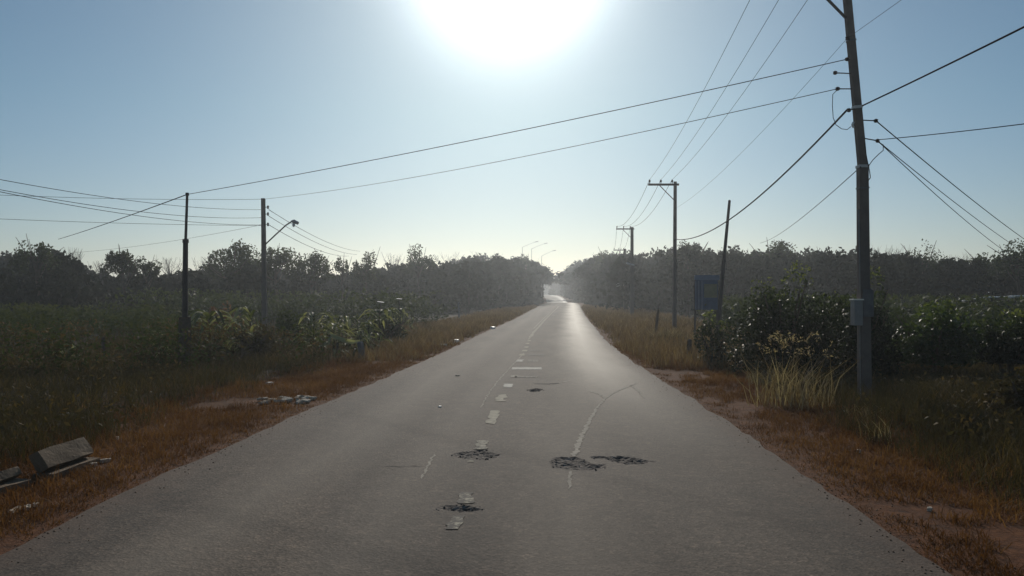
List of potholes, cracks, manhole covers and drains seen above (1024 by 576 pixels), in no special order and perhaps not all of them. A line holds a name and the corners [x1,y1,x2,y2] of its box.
pothole [590,456,655,465]
pothole [451,449,502,460]
pothole [435,503,483,513]
crack [533,381,645,488]
pothole [548,456,606,471]
crack [384,454,436,479]
